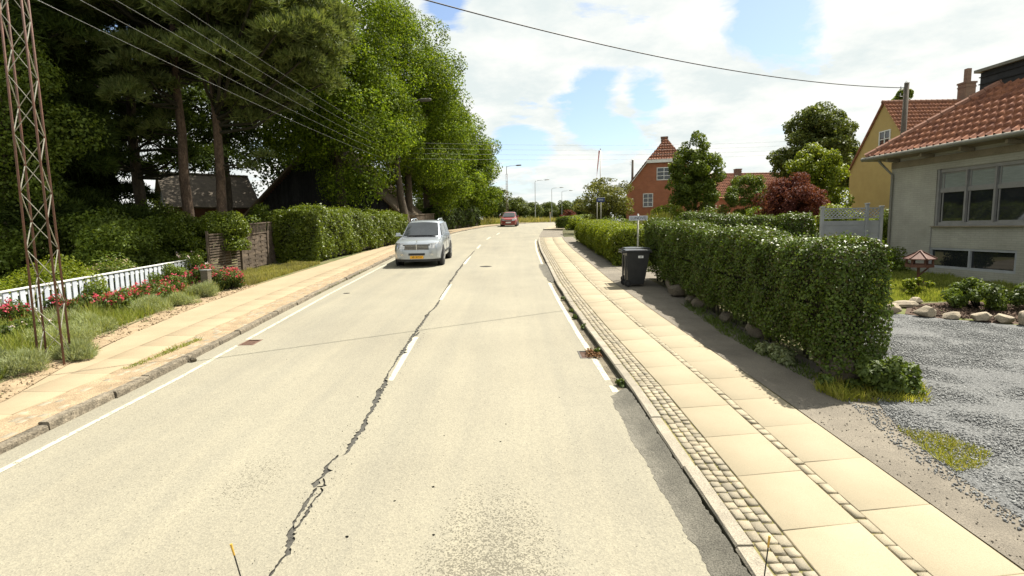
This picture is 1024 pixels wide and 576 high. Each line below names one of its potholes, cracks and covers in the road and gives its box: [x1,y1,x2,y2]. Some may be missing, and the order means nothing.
crack [269,254,472,576]
